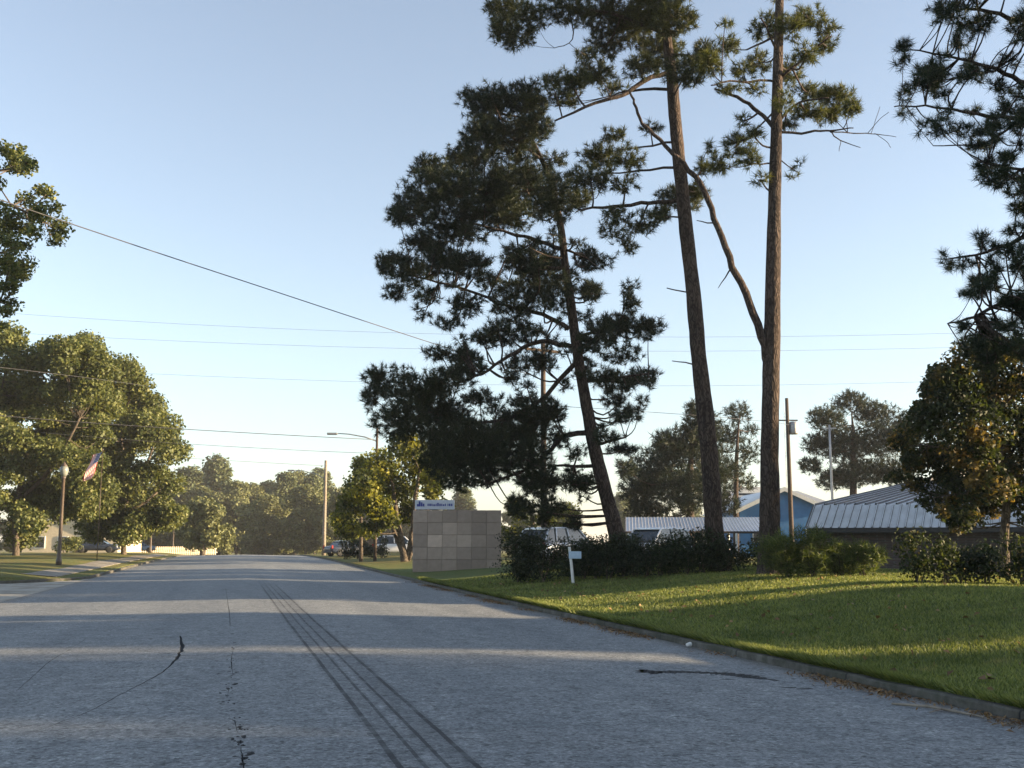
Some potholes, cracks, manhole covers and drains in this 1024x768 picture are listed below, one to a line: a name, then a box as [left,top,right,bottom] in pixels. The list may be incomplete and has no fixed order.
crack [19,636,185,736]
crack [637,669,812,689]
